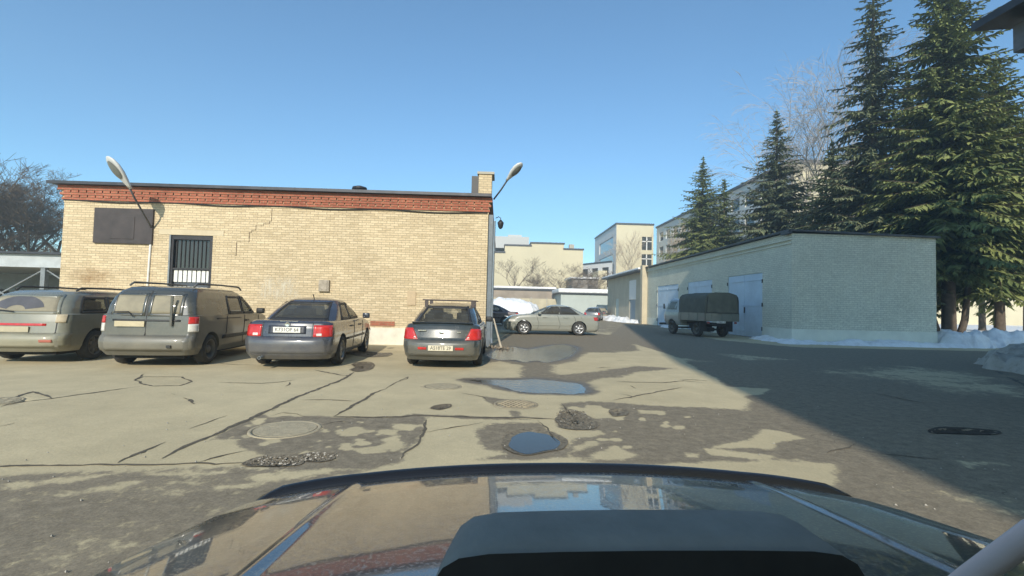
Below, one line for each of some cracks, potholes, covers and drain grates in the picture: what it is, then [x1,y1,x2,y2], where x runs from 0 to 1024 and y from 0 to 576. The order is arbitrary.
pothole [609,408,629,416]
pothole [501,428,568,455]
pothole [299,451,336,462]
manhole cover [247,420,322,439]
crack [134,374,194,404]
pothole [555,409,599,430]
pothole [242,455,304,467]
crack [119,442,164,462]
